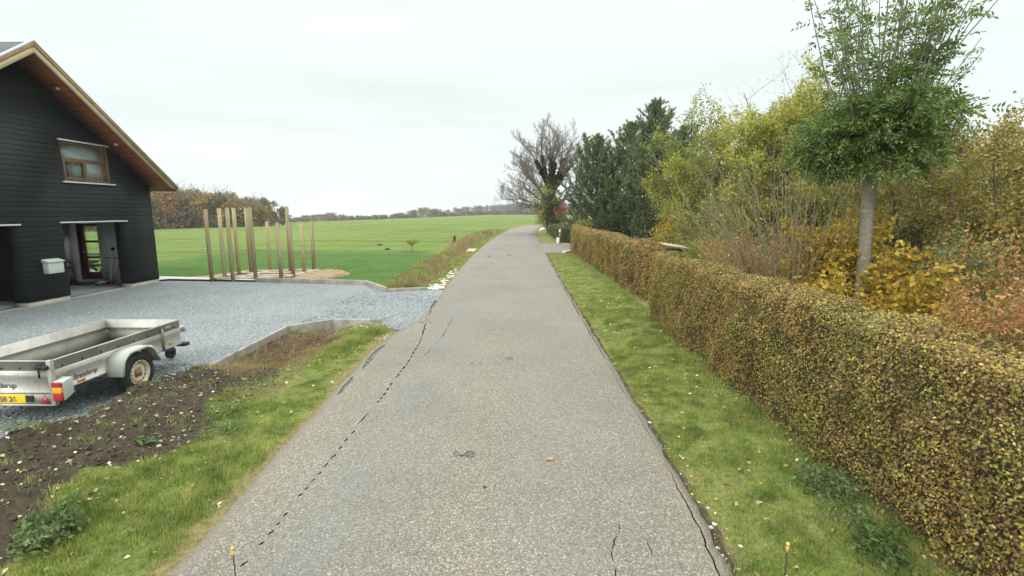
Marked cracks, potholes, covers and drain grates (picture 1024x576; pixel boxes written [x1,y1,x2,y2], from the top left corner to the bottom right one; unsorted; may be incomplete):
crack [548,258,720,576]
crack [240,300,453,567]
pothole [453,451,476,459]
